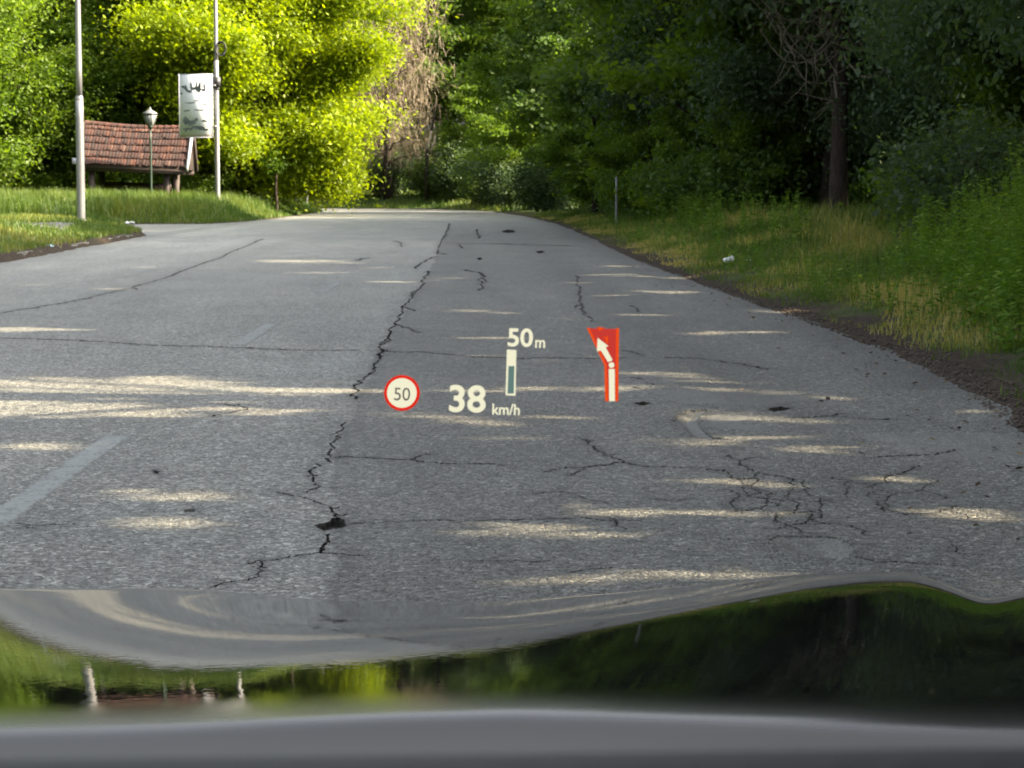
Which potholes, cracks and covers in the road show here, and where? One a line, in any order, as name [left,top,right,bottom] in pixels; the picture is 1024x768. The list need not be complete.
crack [831,449,969,519]
crack [6,223,769,399]
pothole [315,518,346,531]
crack [855,544,961,566]
crack [210,437,868,588]
crack [212,403,249,417]
